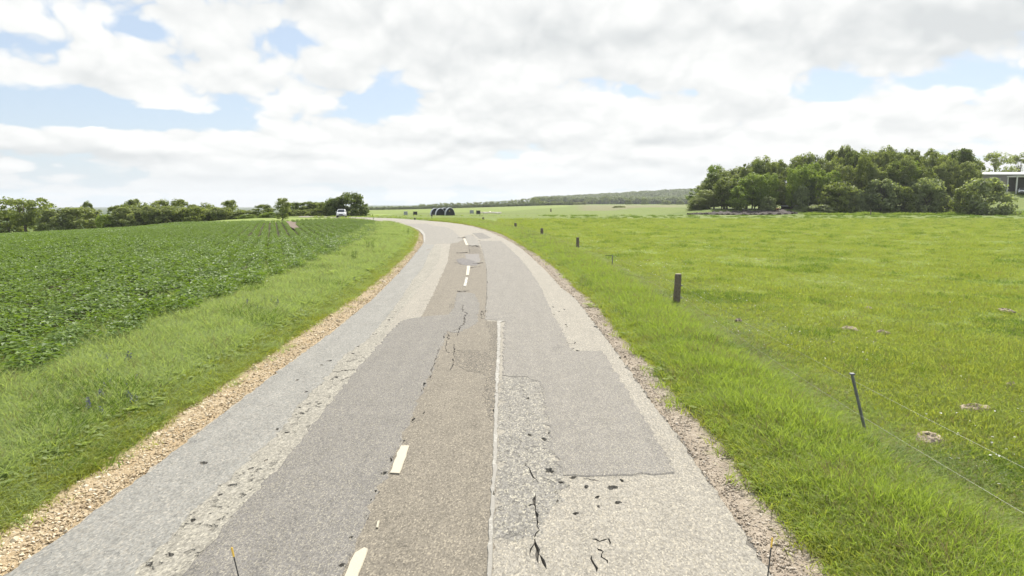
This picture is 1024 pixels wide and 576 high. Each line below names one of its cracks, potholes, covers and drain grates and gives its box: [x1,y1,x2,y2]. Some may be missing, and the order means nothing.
crack [443,290,485,370]
crack [525,461,547,569]
